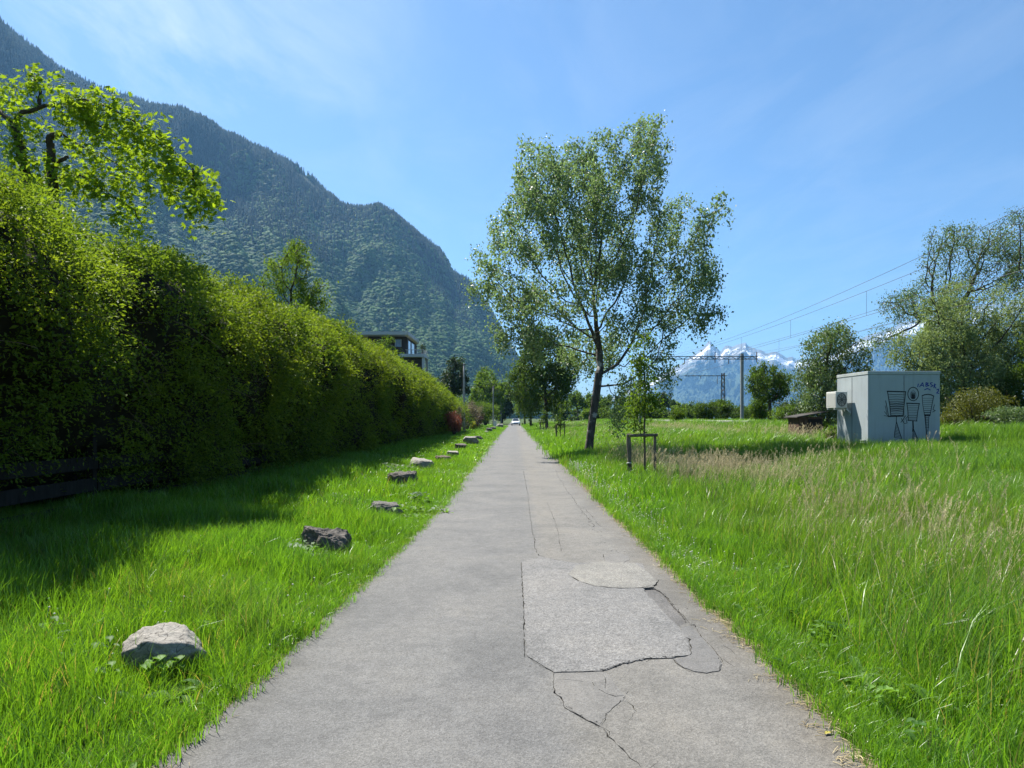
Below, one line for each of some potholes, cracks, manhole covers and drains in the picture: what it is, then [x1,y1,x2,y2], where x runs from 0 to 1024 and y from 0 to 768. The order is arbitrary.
crack [521,471,733,768]
